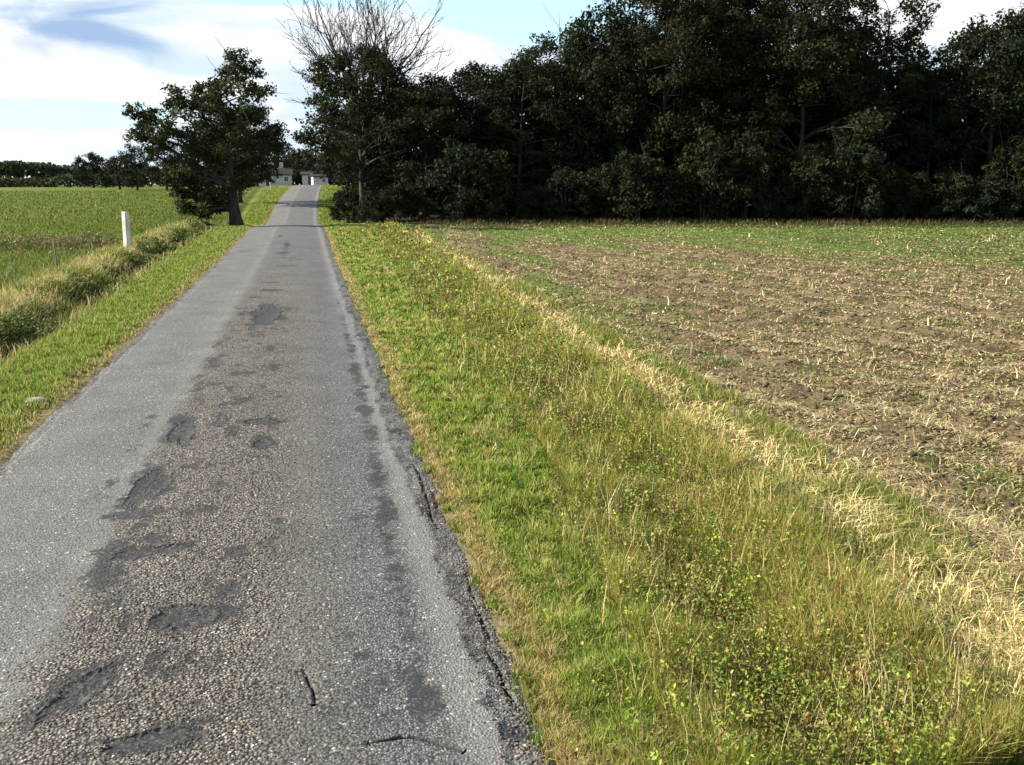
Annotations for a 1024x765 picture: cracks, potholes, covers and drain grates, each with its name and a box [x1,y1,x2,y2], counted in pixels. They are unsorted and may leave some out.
crack [411,465,442,529]
crack [368,578,543,755]
crack [298,670,322,705]
